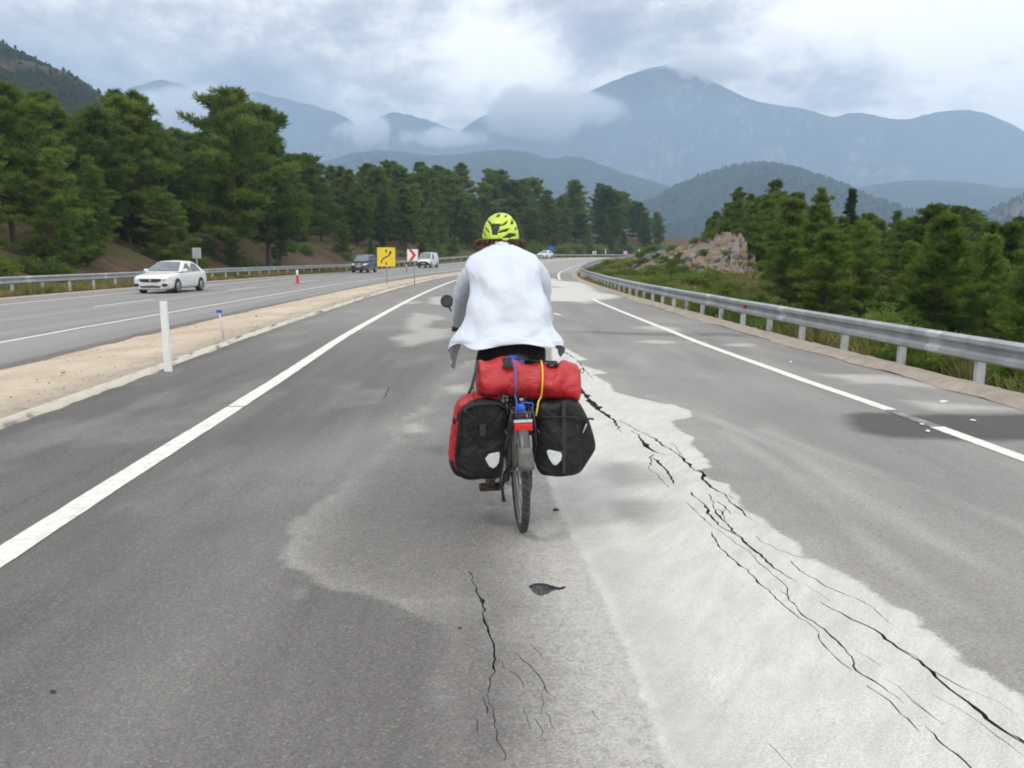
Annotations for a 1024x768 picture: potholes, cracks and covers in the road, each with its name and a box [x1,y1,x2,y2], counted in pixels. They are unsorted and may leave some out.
crack [564,352,620,430]
crack [621,421,1024,768]
pothole [529,583,566,596]
crack [468,571,599,761]
